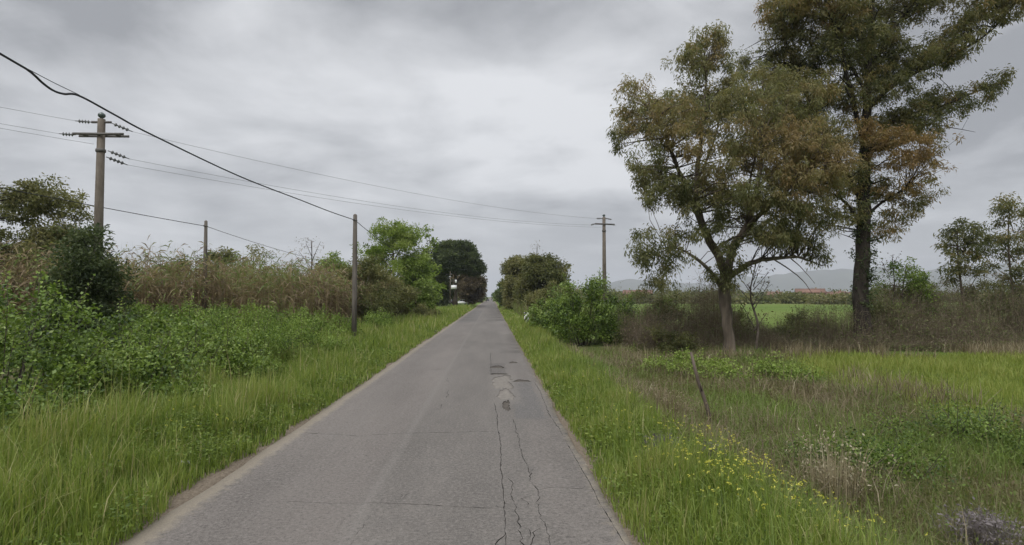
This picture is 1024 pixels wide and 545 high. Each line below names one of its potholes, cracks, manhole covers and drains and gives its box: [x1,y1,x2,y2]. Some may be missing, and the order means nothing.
crack [291,384,625,545]
